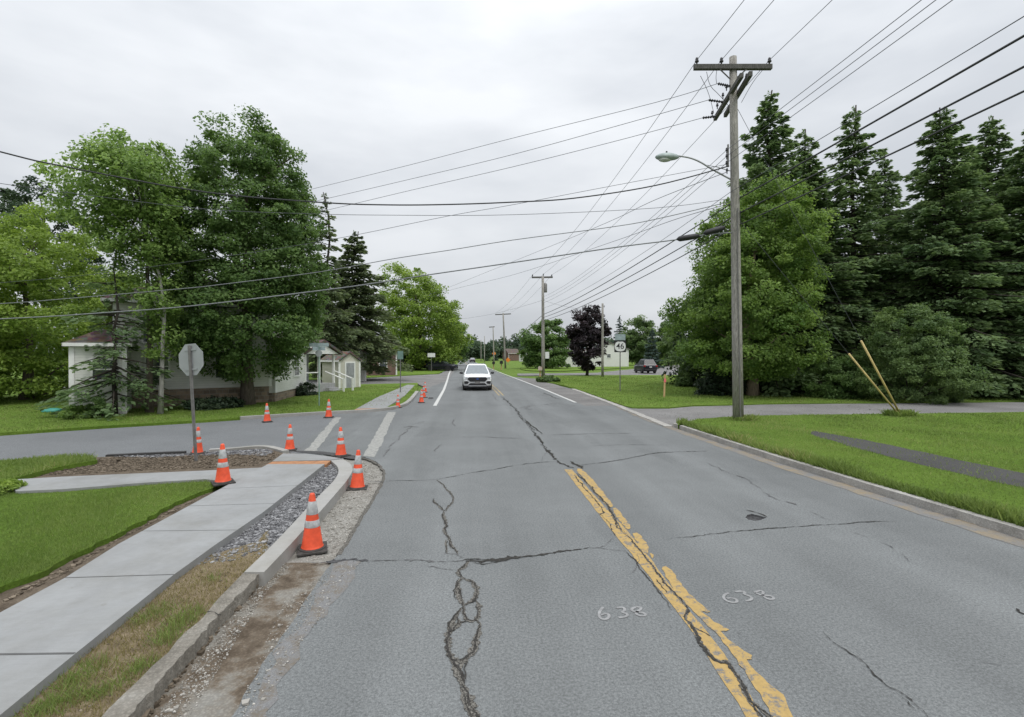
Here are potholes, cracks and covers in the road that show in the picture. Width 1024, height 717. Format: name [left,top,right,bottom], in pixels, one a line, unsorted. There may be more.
crack [321,444,874,717]
crack [521,393,593,435]
crack [823,632,928,717]
